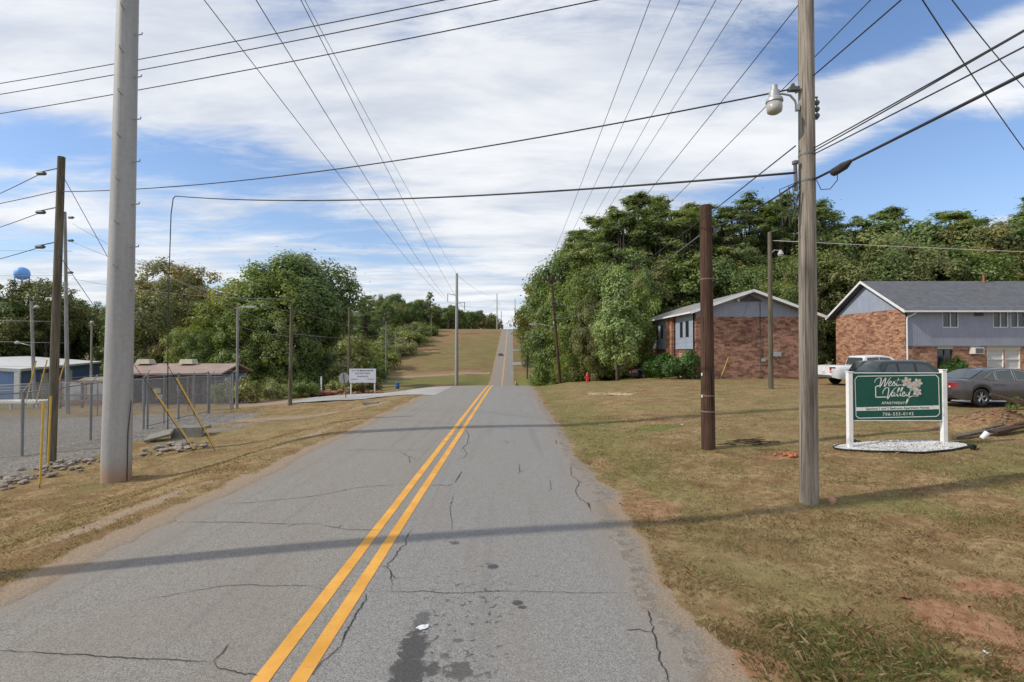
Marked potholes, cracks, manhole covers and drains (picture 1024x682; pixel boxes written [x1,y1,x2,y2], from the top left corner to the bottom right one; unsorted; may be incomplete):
crack [2,646,258,676]
crack [629,610,669,682]
crack [151,528,615,674]
